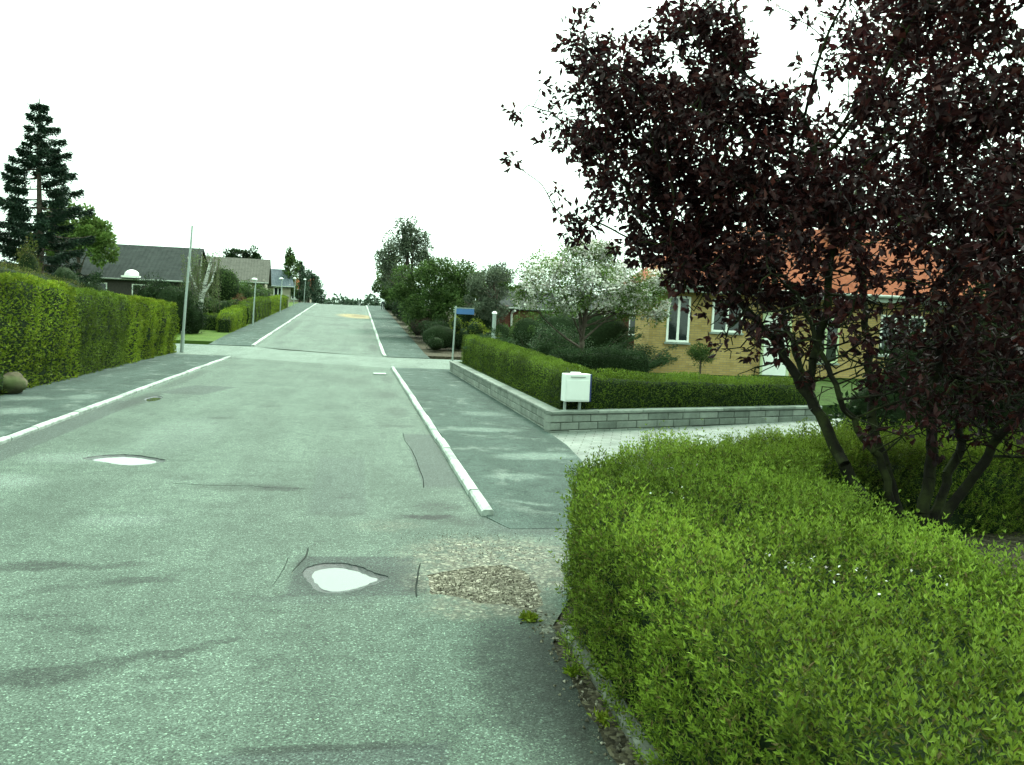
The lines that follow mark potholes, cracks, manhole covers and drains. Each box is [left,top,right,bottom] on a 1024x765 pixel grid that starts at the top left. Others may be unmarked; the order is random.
pothole [83,454,165,465]
crack [272,547,309,586]
pothole [302,563,389,593]
